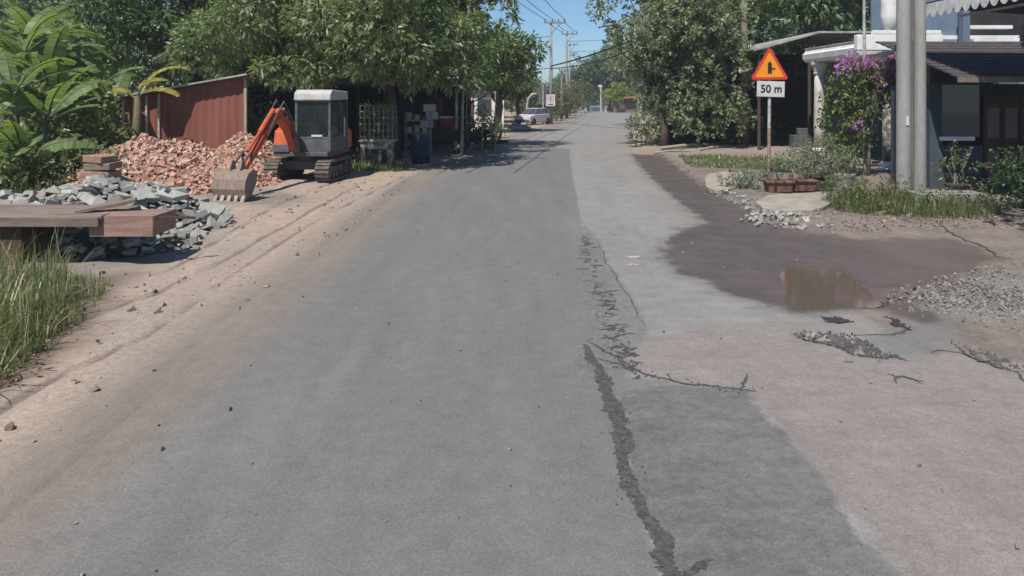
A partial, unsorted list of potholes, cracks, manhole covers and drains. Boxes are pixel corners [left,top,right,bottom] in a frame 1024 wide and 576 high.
crack [887,354,923,384]
crack [576,234,757,576]
pothole [779,266,886,310]
pothole [791,329,893,360]
crack [940,218,1011,259]
pothole [884,316,912,330]
